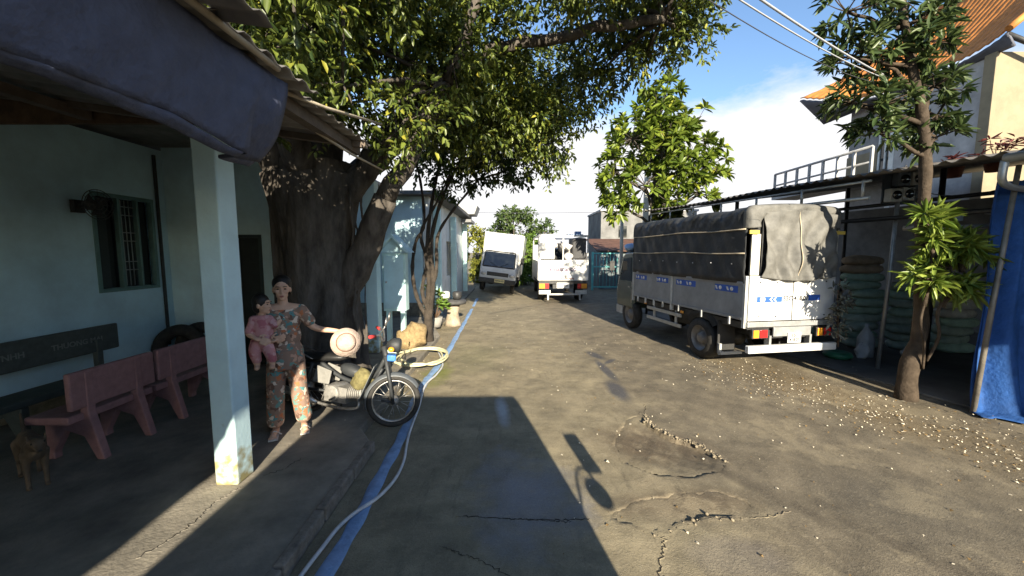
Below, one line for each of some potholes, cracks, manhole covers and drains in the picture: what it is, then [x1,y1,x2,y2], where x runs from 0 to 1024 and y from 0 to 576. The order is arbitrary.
crack [136,458,301,559]
crack [656,511,791,576]
crack [443,547,510,576]
crack [455,515,591,524]
pothole [615,411,733,477]
